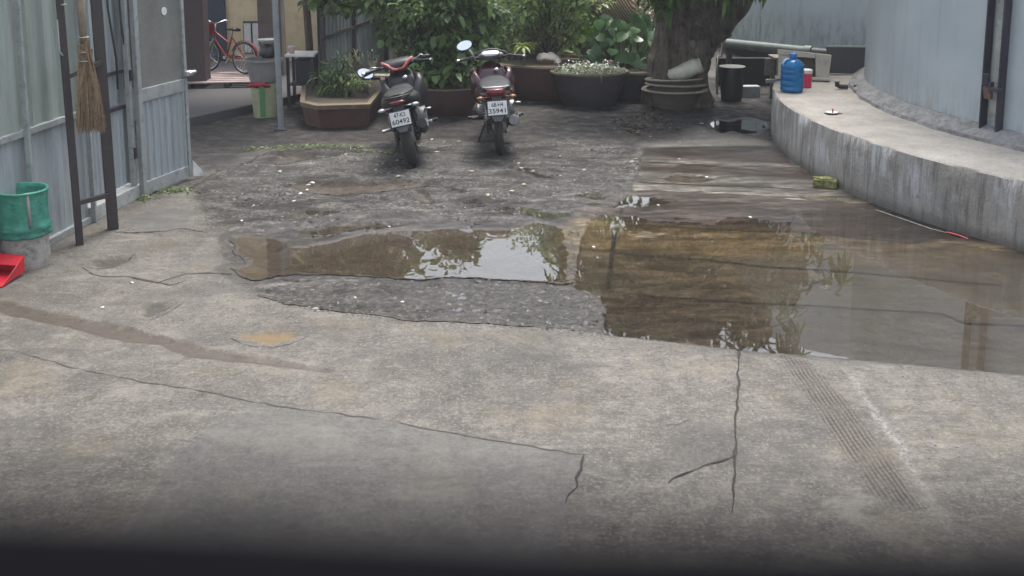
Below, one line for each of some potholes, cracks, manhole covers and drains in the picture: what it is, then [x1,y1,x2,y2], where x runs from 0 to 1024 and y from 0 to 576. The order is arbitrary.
crack [0,350,585,500]
crack [83,256,232,285]
pothole [257,280,610,335]
crack [668,351,741,504]
pothole [229,219,577,284]
